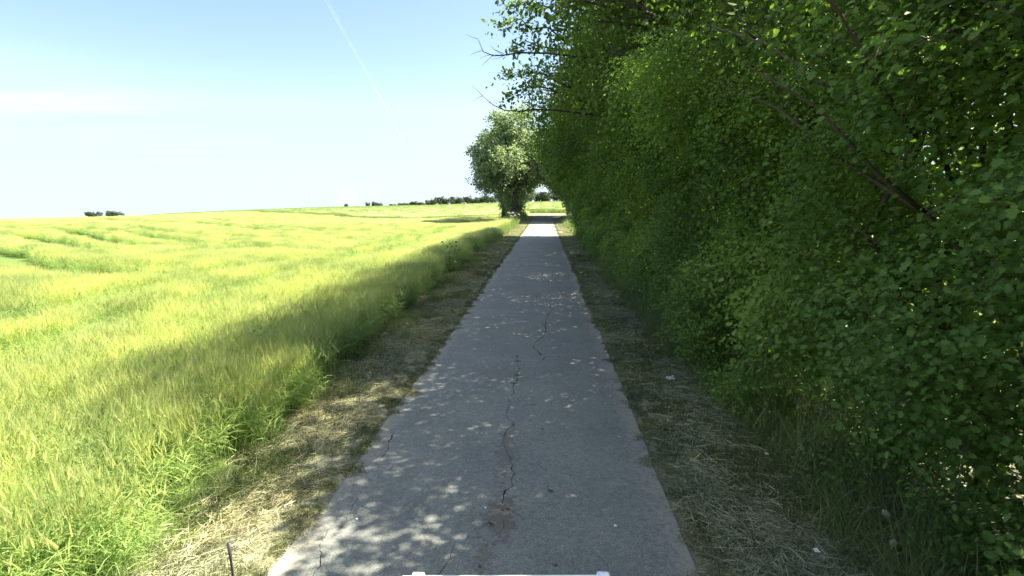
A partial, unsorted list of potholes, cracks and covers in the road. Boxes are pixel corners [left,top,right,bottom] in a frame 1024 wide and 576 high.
crack [500,296,557,528]
crack [313,486,359,576]
